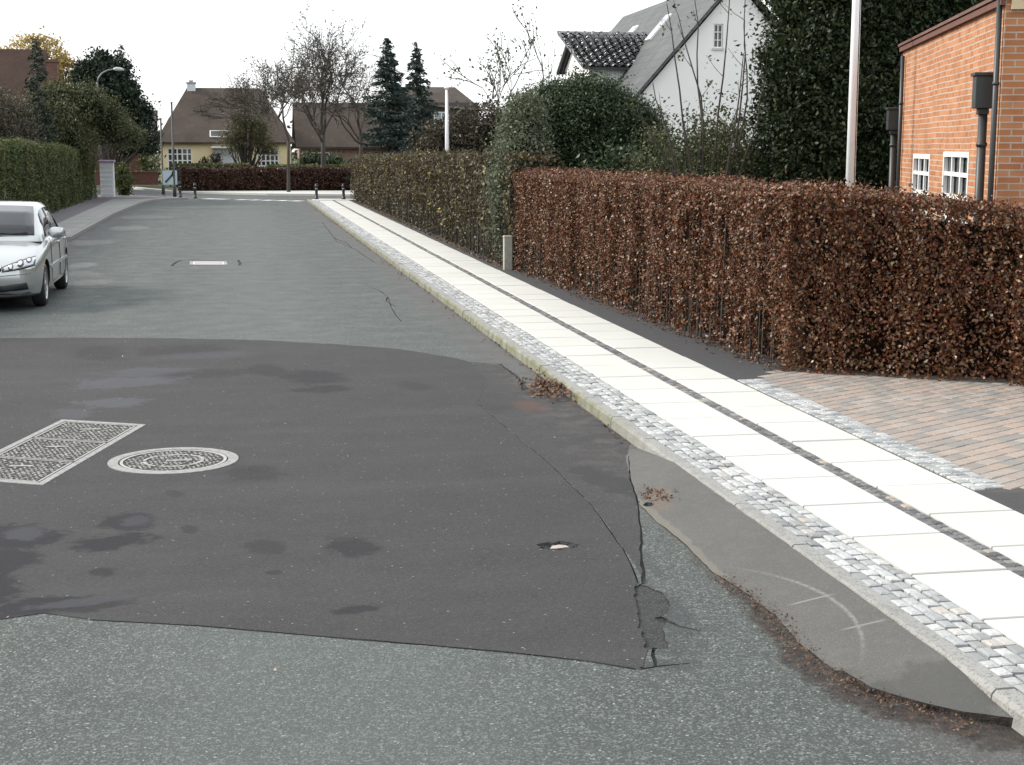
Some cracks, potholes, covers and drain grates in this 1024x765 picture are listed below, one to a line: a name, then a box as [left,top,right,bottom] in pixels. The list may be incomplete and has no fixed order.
manhole cover [107,447,239,475]
pothole [537,542,579,550]
